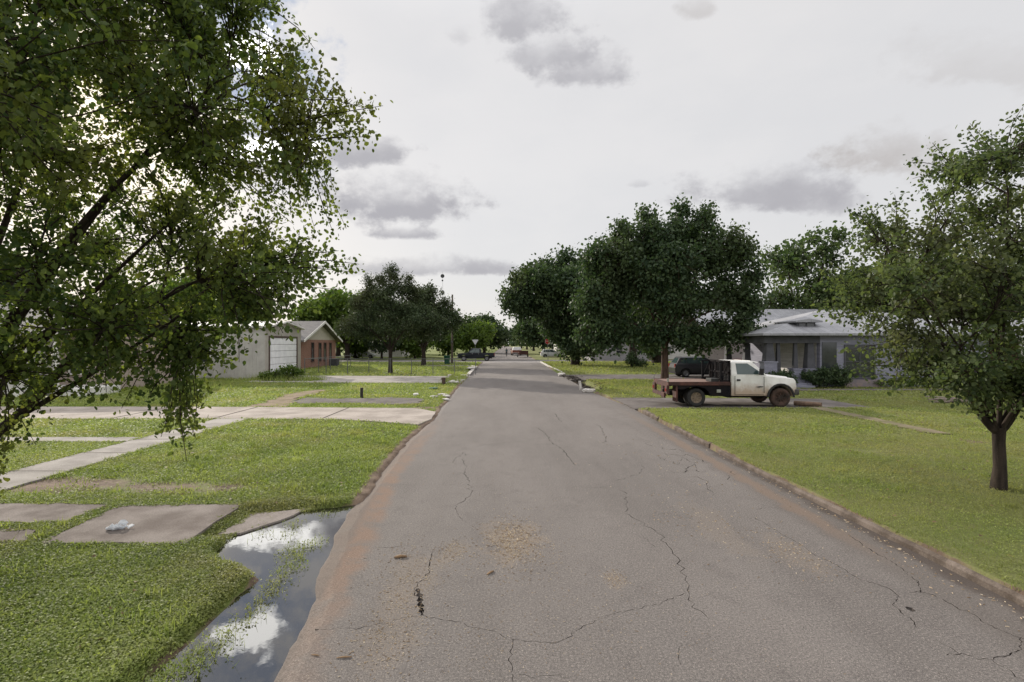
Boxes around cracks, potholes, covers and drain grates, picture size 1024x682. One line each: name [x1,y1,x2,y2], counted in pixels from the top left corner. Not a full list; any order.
crack [315,488,708,681]
crack [763,522,1023,680]
